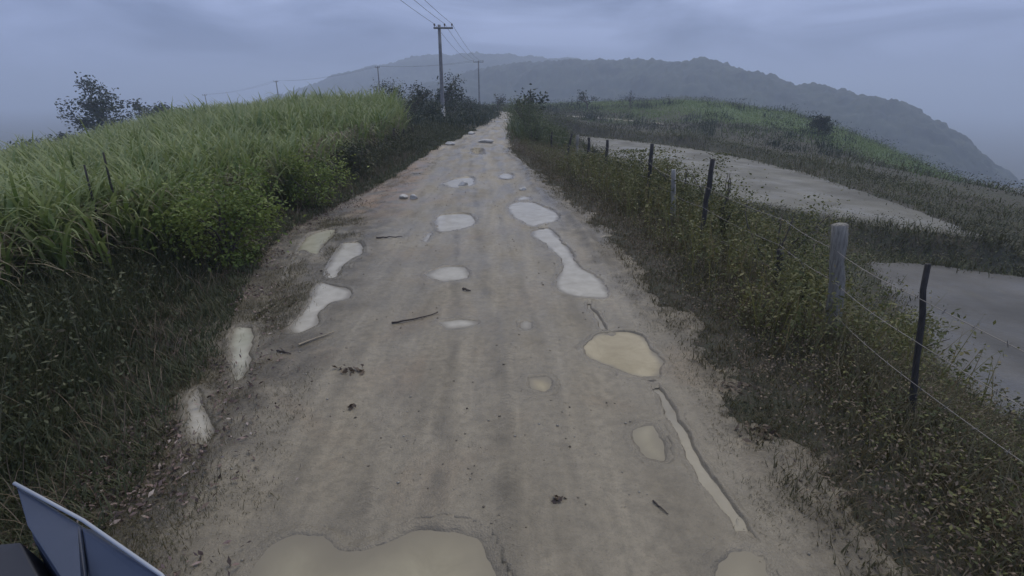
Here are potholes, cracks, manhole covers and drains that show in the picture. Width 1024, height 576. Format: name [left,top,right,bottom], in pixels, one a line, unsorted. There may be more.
pothole [320,239,371,281]
pothole [437,176,481,188]
pothole [282,281,358,336]
pothole [172,383,220,449]
pothole [575,327,671,389]
pothole [220,321,261,384]
pothole [515,372,560,396]
pothole [231,515,512,576]
pothole [503,199,565,229]
pothole [621,417,681,466]
pothole [428,315,485,332]
pothole [276,227,340,281]
